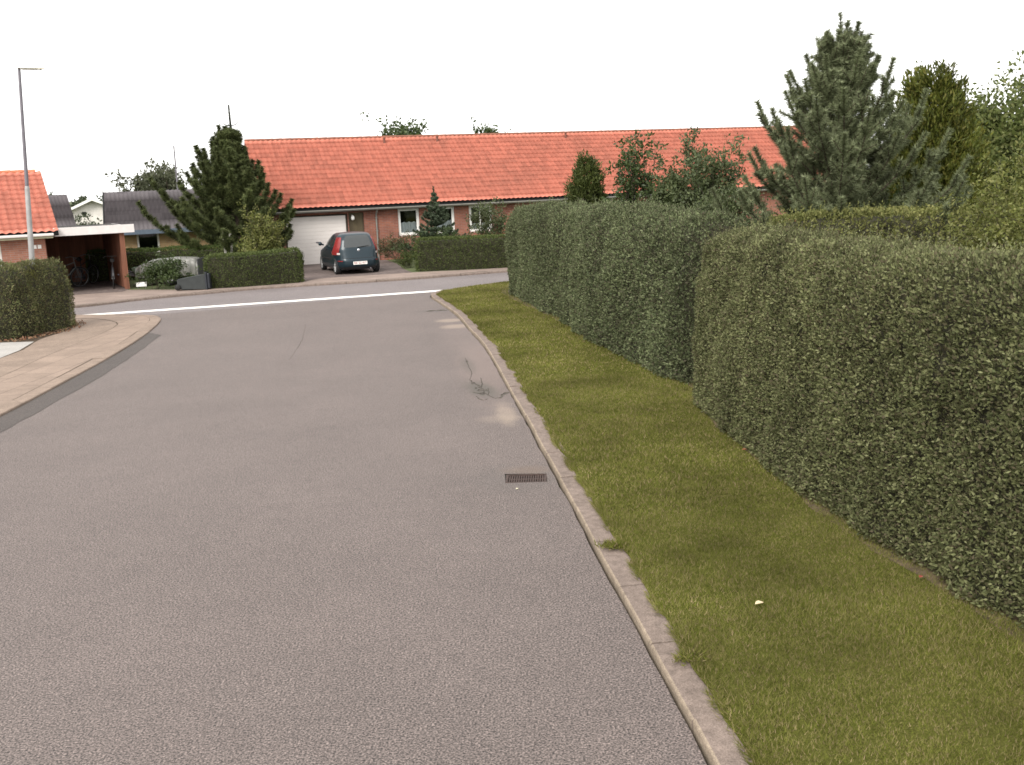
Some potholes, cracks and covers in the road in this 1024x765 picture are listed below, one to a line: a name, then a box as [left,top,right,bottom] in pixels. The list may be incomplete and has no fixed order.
crack [465,358,510,400]
drain grate [505,474,547,483]
